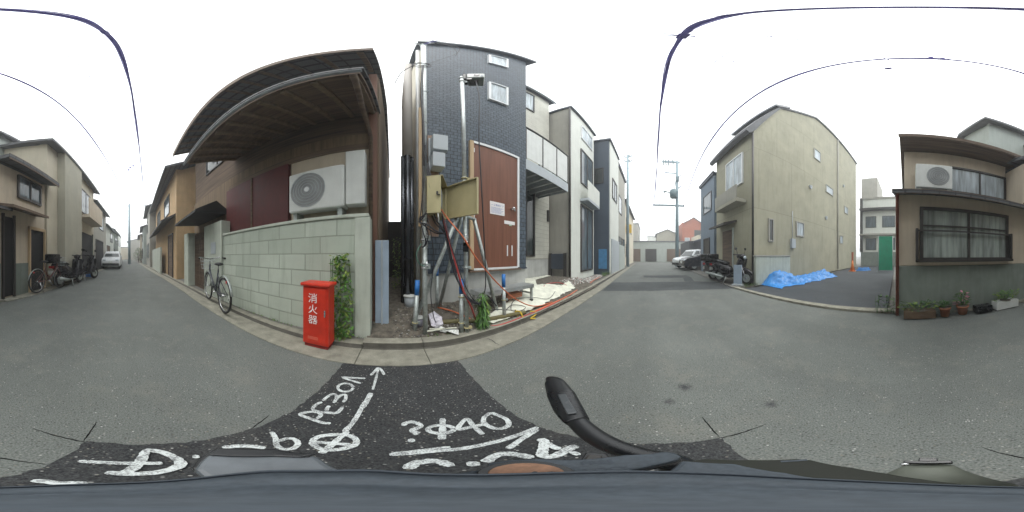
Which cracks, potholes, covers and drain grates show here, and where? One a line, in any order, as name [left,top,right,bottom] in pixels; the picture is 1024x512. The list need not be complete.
crack [33,423,96,442]
crack [702,417,763,438]
